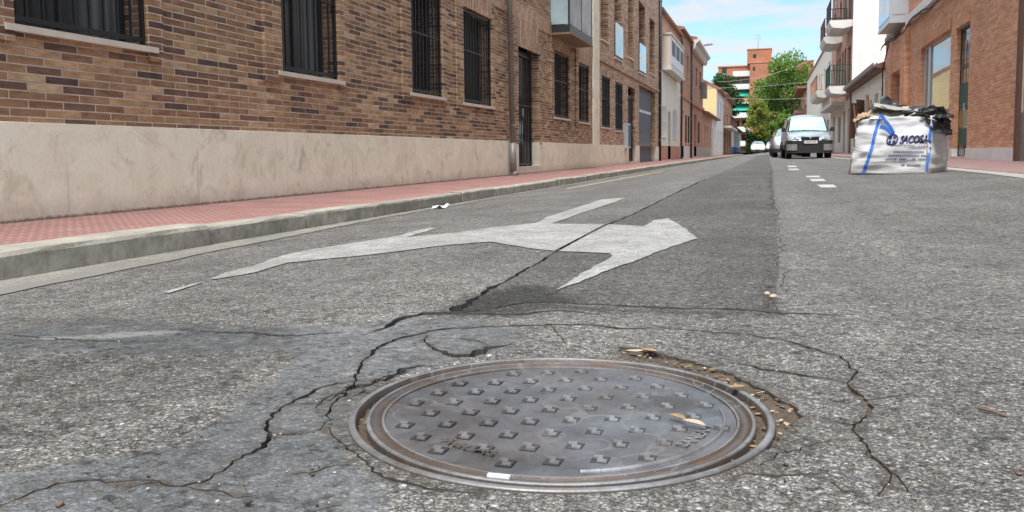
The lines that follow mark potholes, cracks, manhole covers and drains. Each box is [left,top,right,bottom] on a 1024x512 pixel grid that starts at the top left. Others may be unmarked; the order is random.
crack [0,302,912,512]
manhole cover [348,357,776,494]
